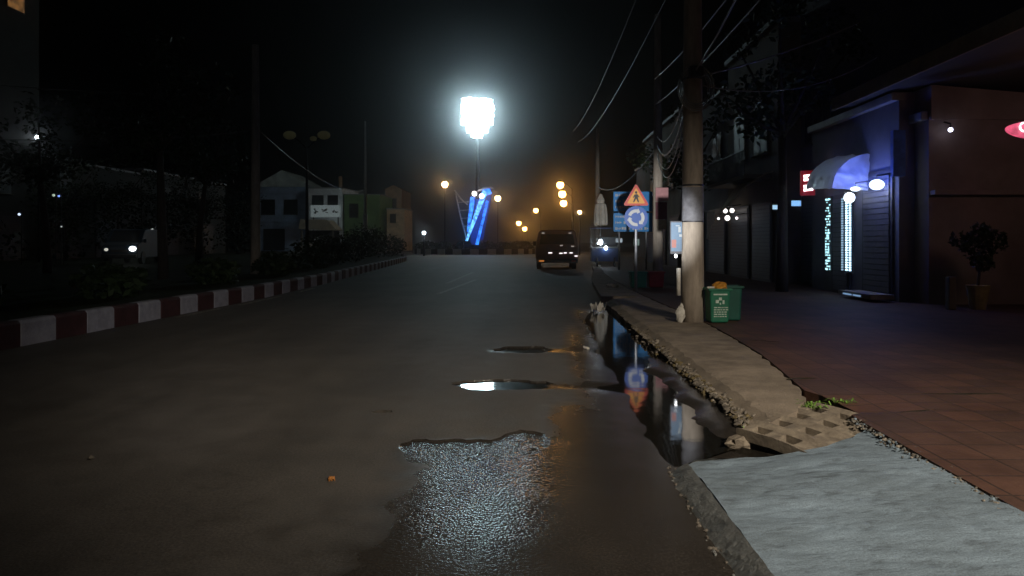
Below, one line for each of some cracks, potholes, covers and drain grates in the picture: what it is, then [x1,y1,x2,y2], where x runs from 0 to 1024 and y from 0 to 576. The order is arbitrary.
pothole [398,430,550,463]
pothole [451,379,553,388]
drain grate [729,402,864,457]
